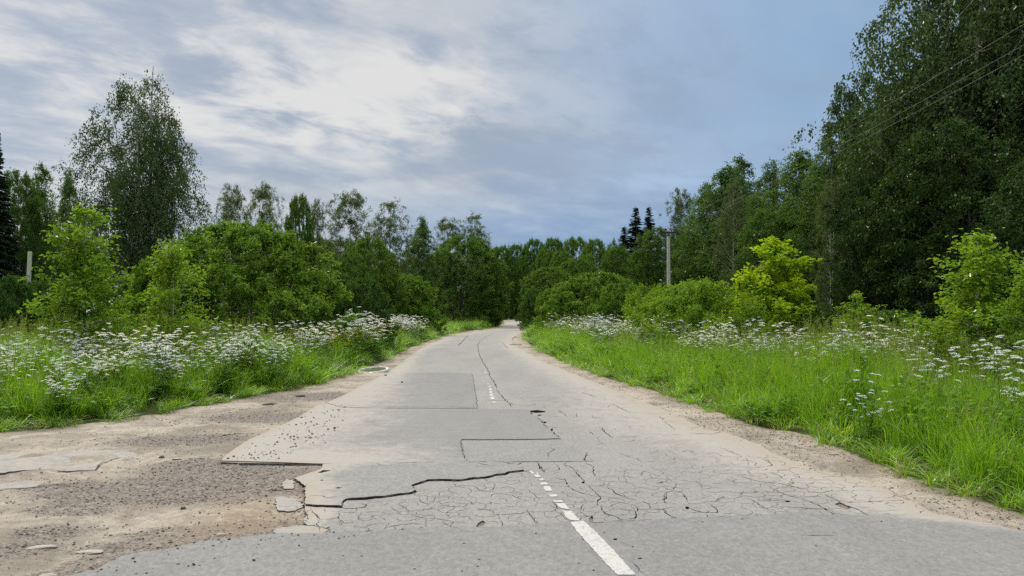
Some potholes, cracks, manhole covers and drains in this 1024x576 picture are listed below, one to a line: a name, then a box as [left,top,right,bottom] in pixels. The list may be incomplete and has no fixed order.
crack [217,384,966,533]
